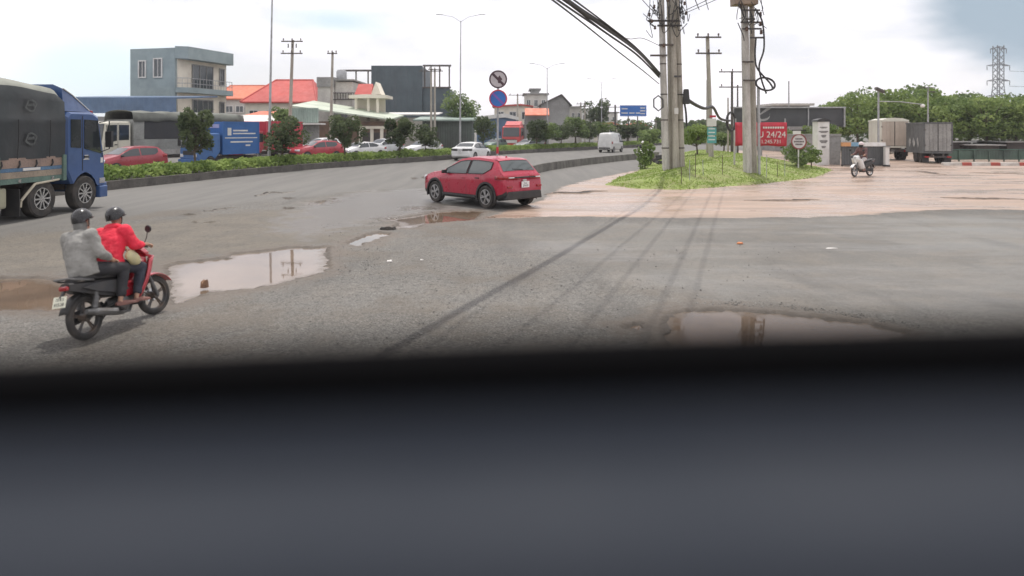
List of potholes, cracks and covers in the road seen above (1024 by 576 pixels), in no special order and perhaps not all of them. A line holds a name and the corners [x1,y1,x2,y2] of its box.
pothole [641,304,857,325]
pothole [152,245,341,310]
pothole [338,231,400,248]
pothole [0,275,103,316]
pothole [379,209,492,229]
